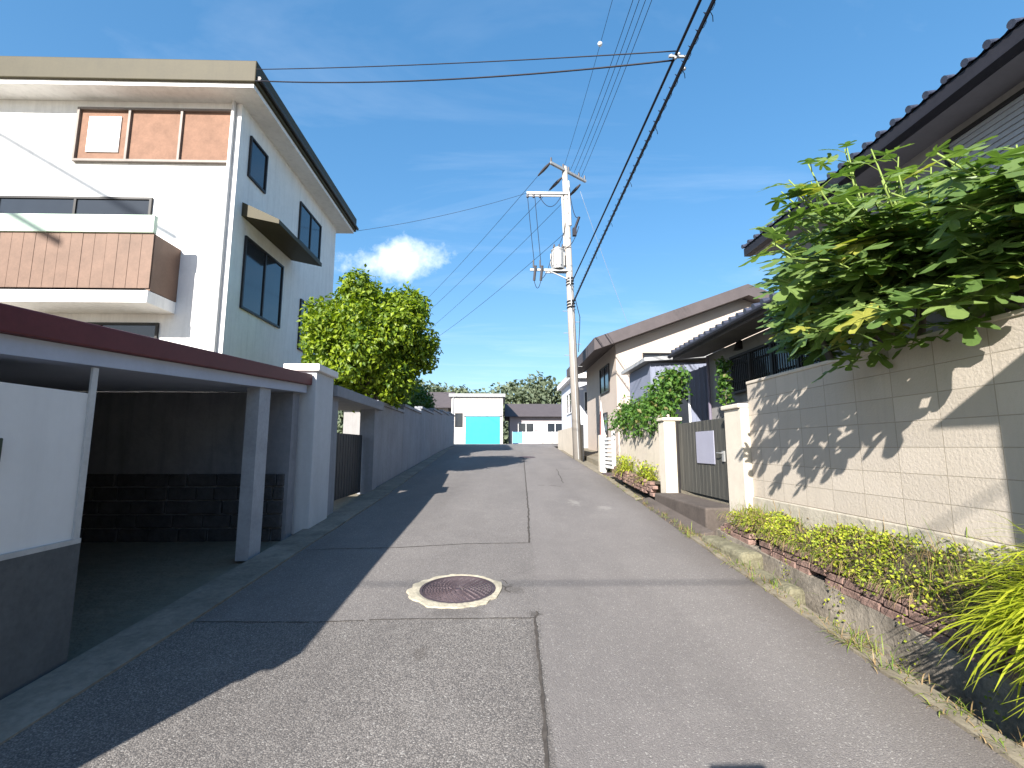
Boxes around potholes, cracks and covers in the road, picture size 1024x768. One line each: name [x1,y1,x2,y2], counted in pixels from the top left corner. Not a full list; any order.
manhole cover [406,574,502,609]
